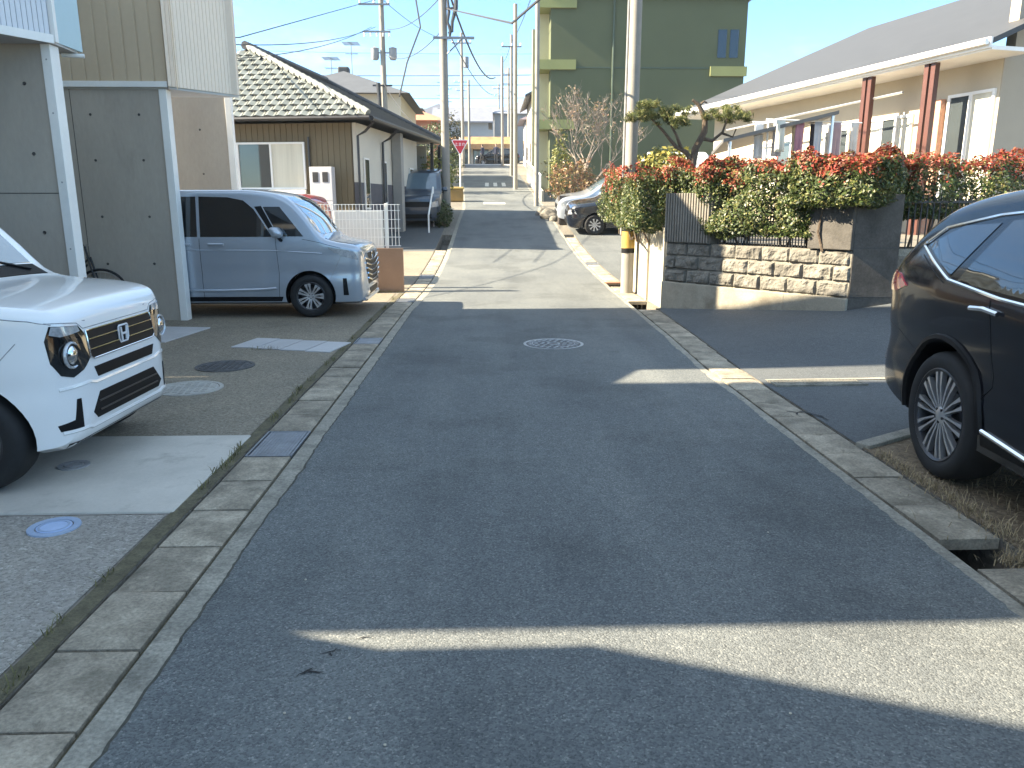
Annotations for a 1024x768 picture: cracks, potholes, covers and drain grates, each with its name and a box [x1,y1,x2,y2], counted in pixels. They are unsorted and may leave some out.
manhole cover [57,460,91,471]
manhole cover [26,517,82,538]
manhole cover [162,380,224,396]
manhole cover [195,360,255,372]
drain grate [245,431,311,459]
manhole cover [523,338,584,349]
